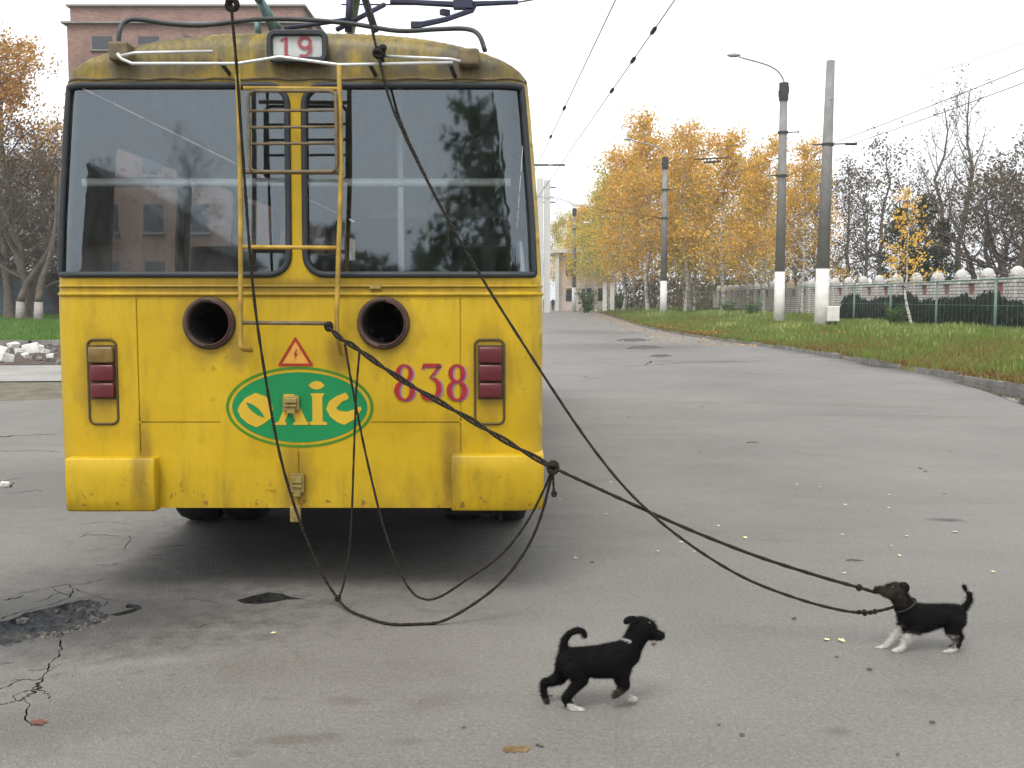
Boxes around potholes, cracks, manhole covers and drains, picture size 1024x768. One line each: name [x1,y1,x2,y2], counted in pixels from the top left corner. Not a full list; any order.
crack [1,522,181,619]
crack [0,639,63,726]
pothole [0,599,111,646]
